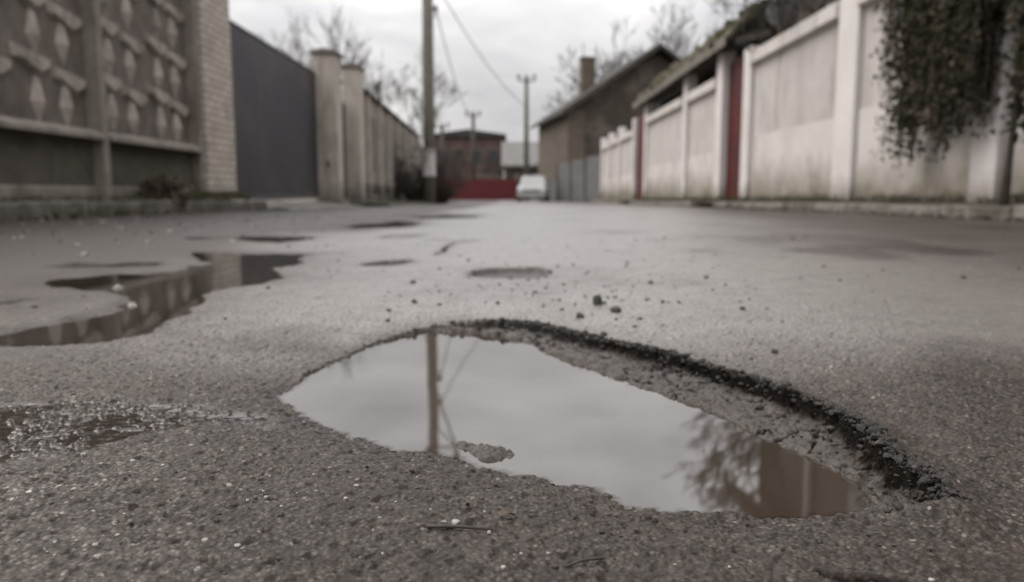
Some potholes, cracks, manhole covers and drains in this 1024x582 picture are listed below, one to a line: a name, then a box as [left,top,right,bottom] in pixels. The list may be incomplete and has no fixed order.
pothole [351,221,423,229]
pothole [167,308,1024,582]
pothole [0,250,327,354]
pothole [468,266,548,279]
